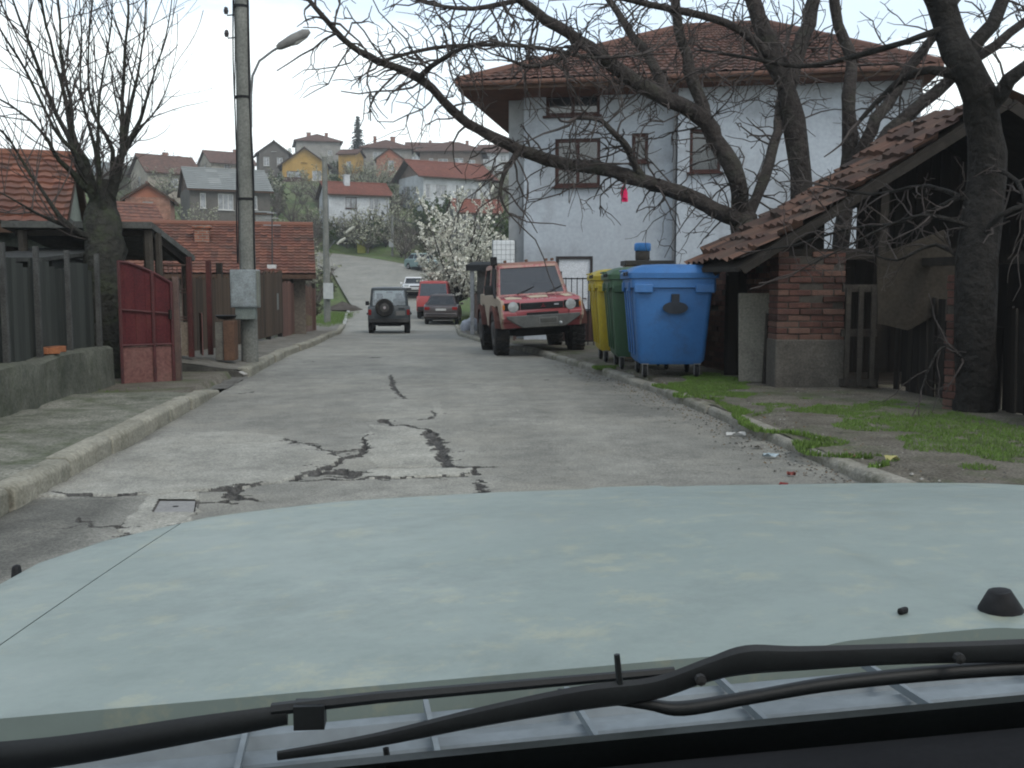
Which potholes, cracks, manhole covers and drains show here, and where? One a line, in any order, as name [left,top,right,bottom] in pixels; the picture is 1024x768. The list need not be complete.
manhole cover [152,500,200,514]
crack [279,357,499,494]
